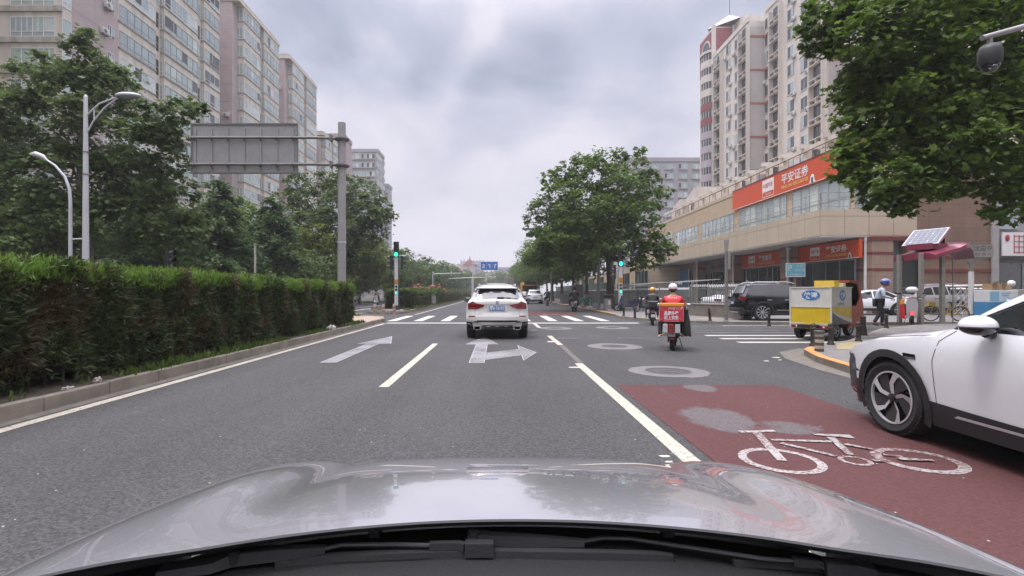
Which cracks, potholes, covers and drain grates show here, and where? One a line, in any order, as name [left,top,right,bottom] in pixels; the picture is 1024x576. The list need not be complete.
manhole cover [628,366,710,378]
